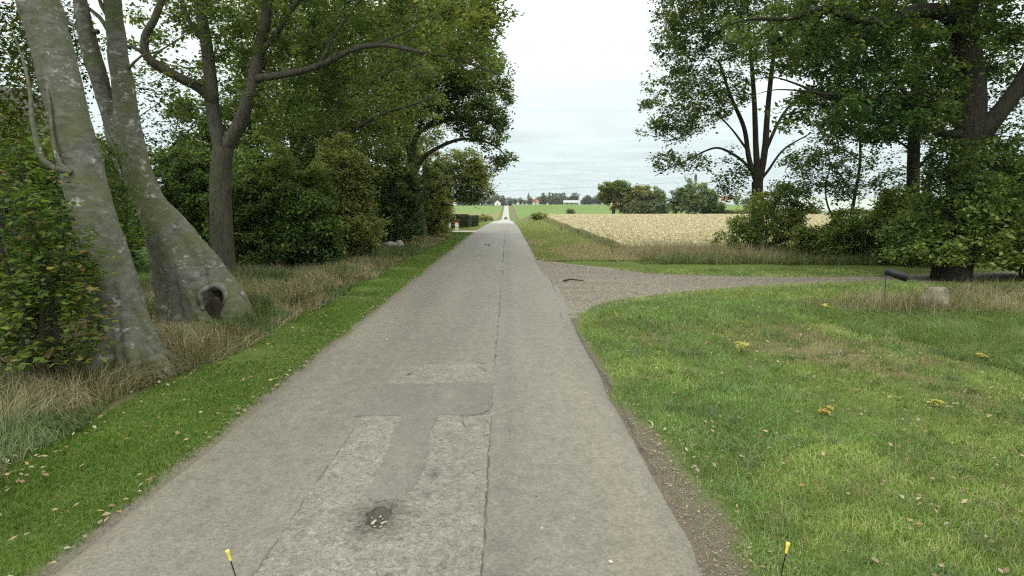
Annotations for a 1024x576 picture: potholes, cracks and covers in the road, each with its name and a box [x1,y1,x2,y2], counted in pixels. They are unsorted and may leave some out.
pothole [365,506,392,529]
crack [462,410,492,576]
